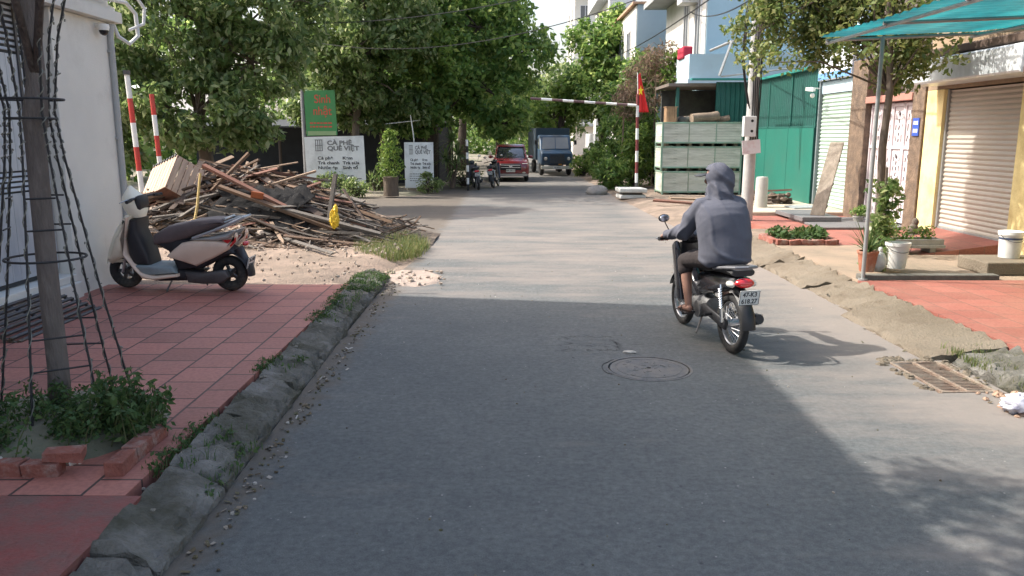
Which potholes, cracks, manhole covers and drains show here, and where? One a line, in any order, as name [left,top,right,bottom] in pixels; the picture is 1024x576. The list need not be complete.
manhole cover [602,356,693,382]
drain grate [875,355,995,393]
crack [559,335,636,352]
